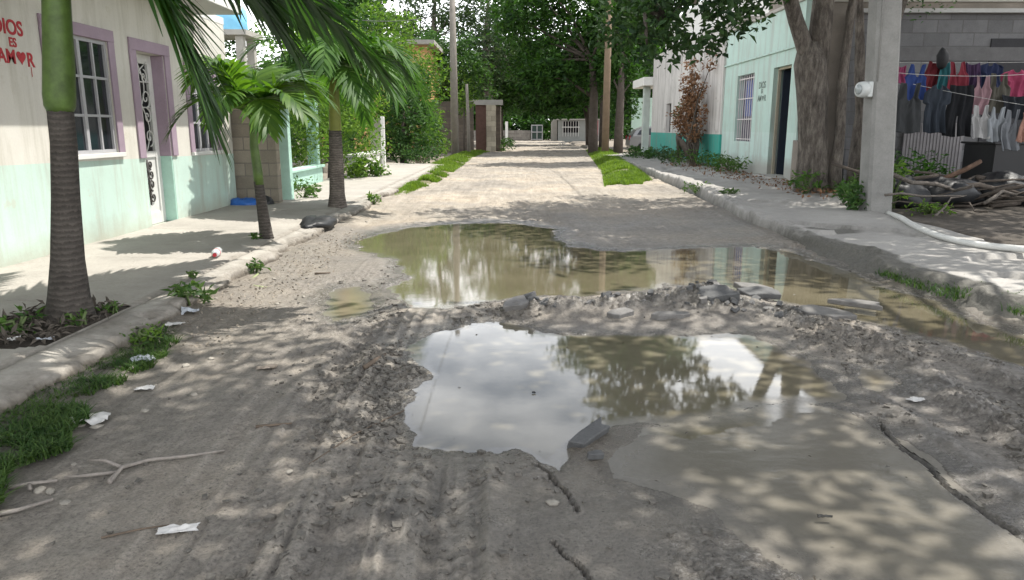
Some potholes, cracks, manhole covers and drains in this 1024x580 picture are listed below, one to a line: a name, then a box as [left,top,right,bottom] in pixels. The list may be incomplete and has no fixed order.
crack [533,463,583,513]
crack [877,423,1023,538]
crack [550,538,594,580]
pothole [315,283,383,324]
pothole [348,221,1024,369]
pothole [394,317,870,477]
